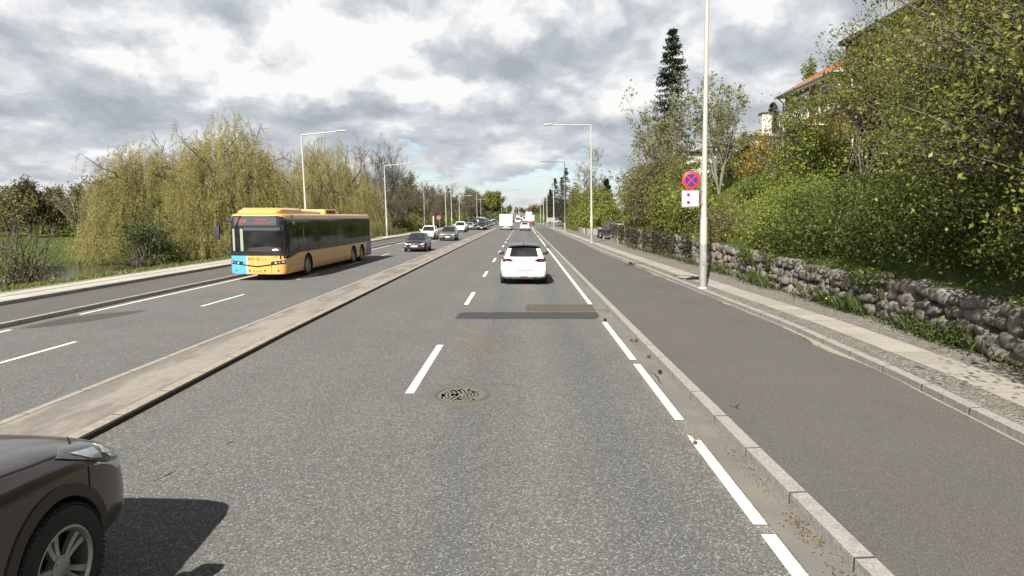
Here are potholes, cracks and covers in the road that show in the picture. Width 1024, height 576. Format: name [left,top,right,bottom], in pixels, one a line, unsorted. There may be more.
manhole cover [424,385,499,406]
